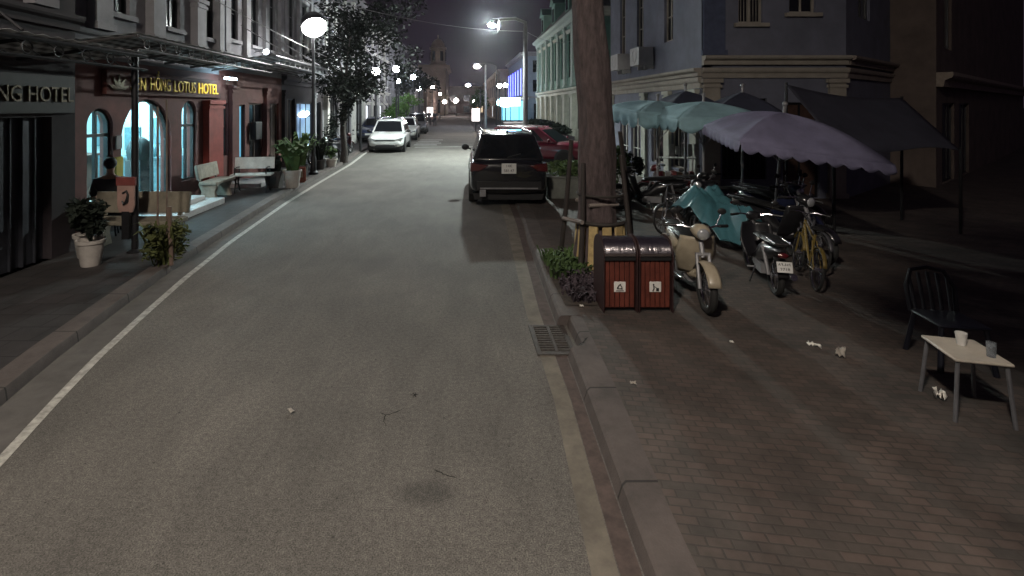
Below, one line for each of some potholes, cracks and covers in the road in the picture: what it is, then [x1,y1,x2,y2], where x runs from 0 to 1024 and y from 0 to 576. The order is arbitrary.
drain grate [528,325,573,356]
